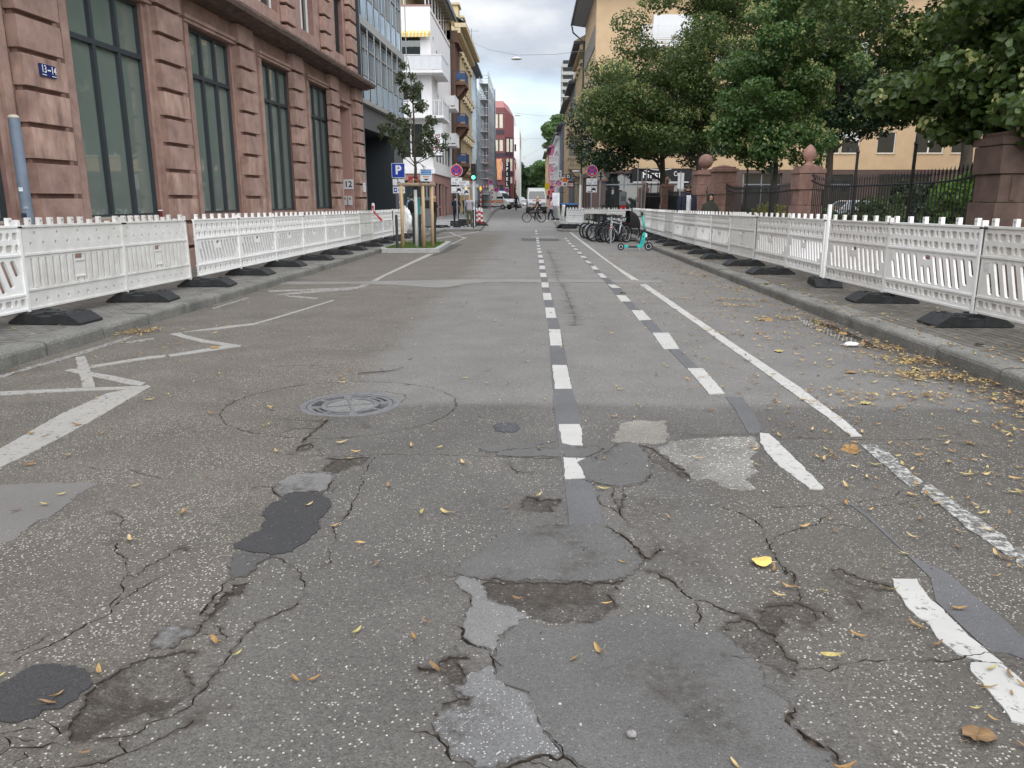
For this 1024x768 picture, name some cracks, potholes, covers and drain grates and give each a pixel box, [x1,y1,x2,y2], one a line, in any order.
crack [586,477,739,627]
pothole [520,496,561,512]
pothole [482,579,624,622]
crack [0,557,306,768]
crack [784,708,841,765]
pothole [321,457,369,473]
crack [725,505,863,617]
manhole cover [300,393,400,417]
